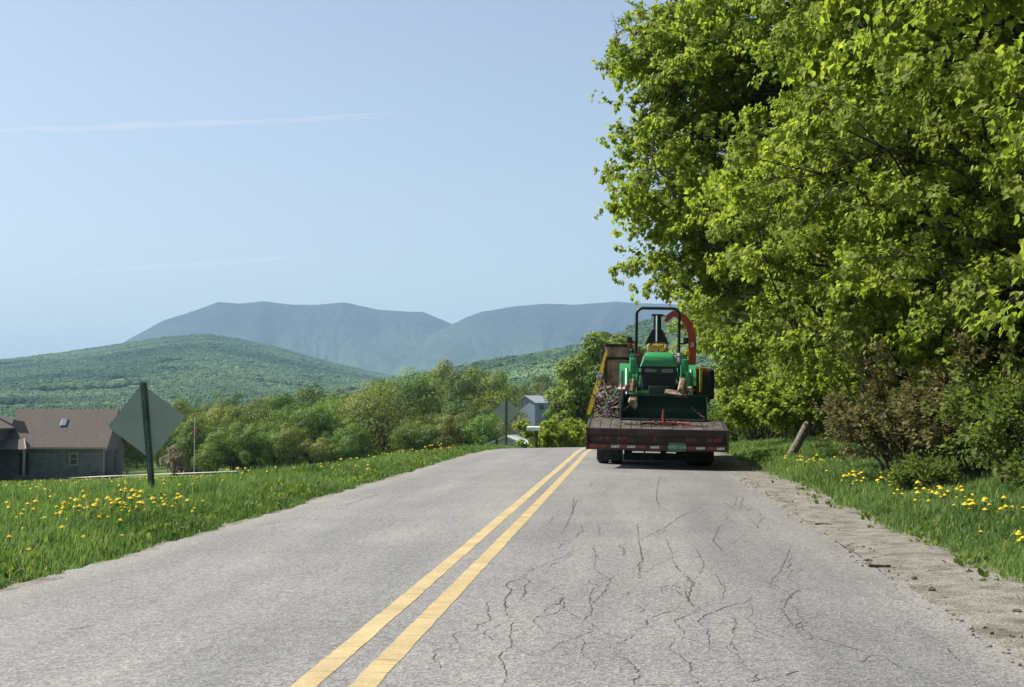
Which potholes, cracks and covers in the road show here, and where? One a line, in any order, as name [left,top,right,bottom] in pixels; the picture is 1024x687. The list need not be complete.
crack [433,574,530,683]
crack [520,478,899,686]
